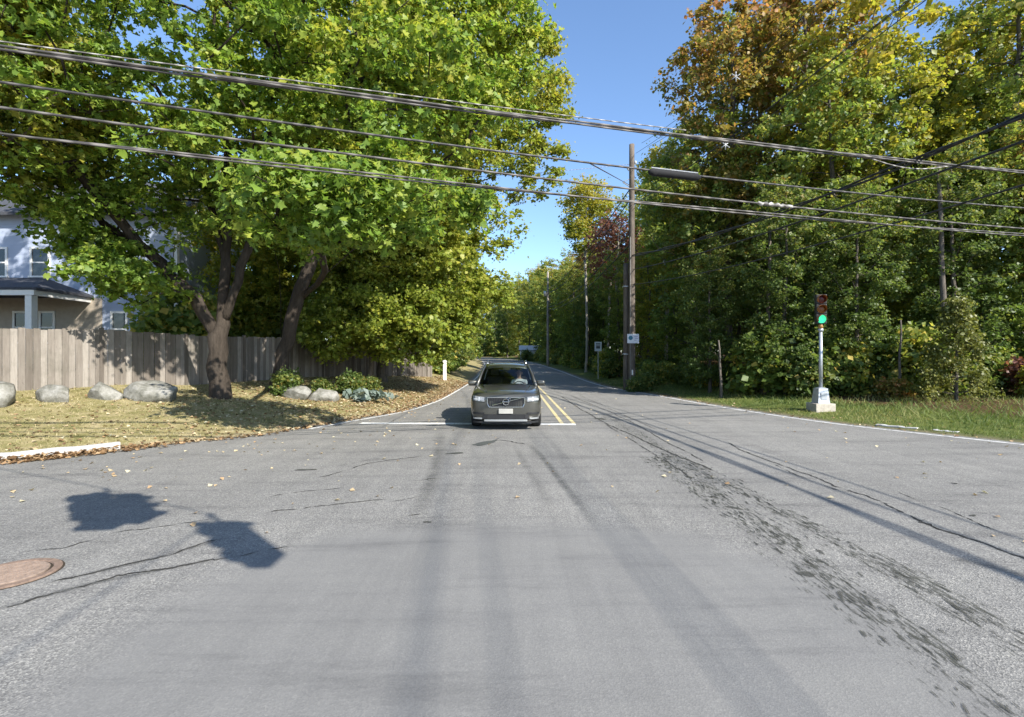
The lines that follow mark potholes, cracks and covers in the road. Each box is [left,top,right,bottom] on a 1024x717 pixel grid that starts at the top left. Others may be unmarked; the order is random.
manhole cover [0,558,65,590]
crack [8,539,295,607]
crack [260,455,432,515]
